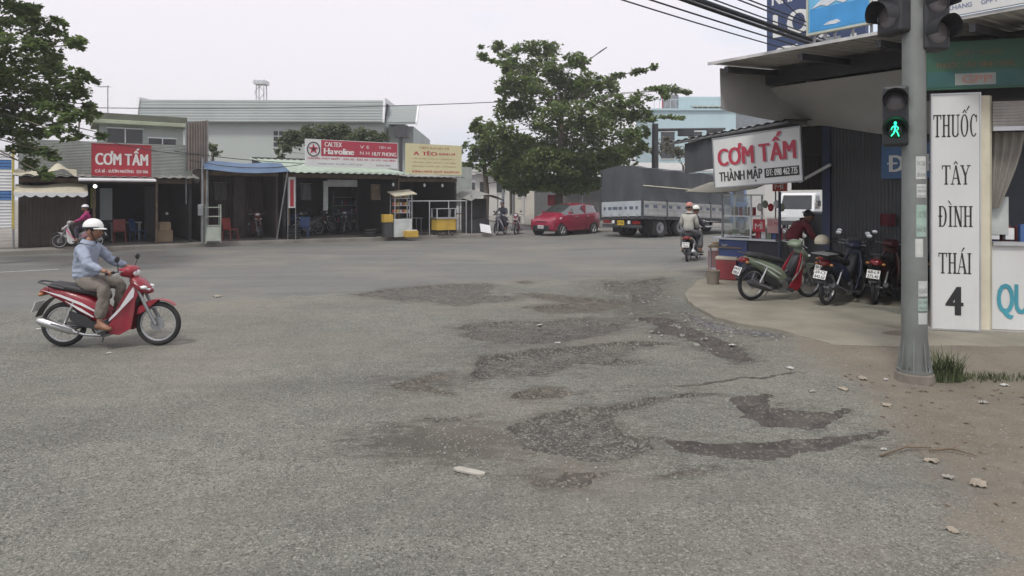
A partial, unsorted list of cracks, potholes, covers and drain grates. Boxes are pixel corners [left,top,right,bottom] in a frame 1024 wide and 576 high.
crack [664,371,805,387]
pothole [506,393,720,463]
pothole [391,372,455,395]
pothole [663,430,890,461]
pothole [354,283,517,306]
pothole [528,472,613,488]
pothole [470,341,671,380]
pothole [510,387,576,400]
